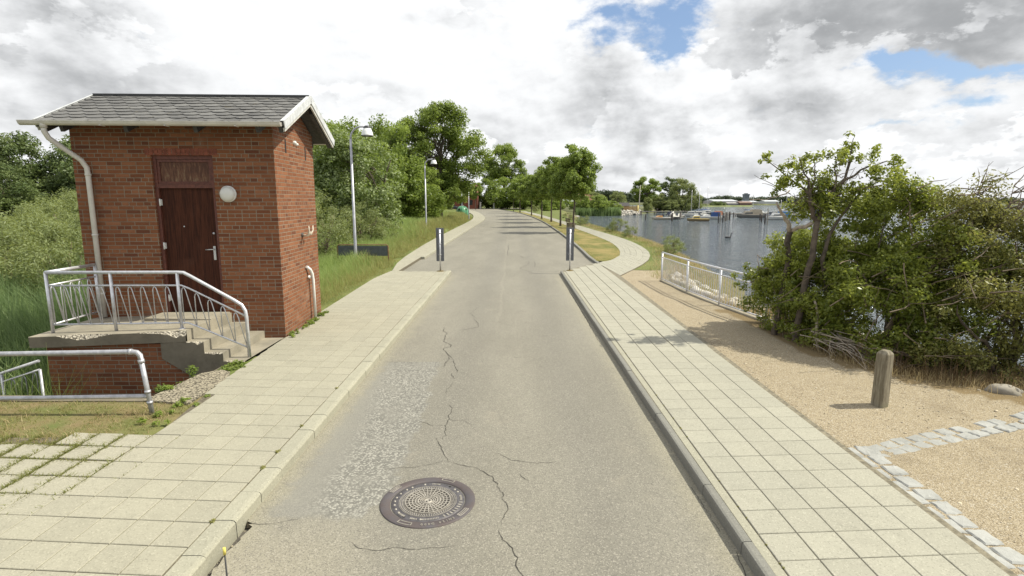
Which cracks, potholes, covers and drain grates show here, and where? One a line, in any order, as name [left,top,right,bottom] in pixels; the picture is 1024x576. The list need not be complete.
manhole cover [380,477,475,529]
crack [393,410,551,575]
